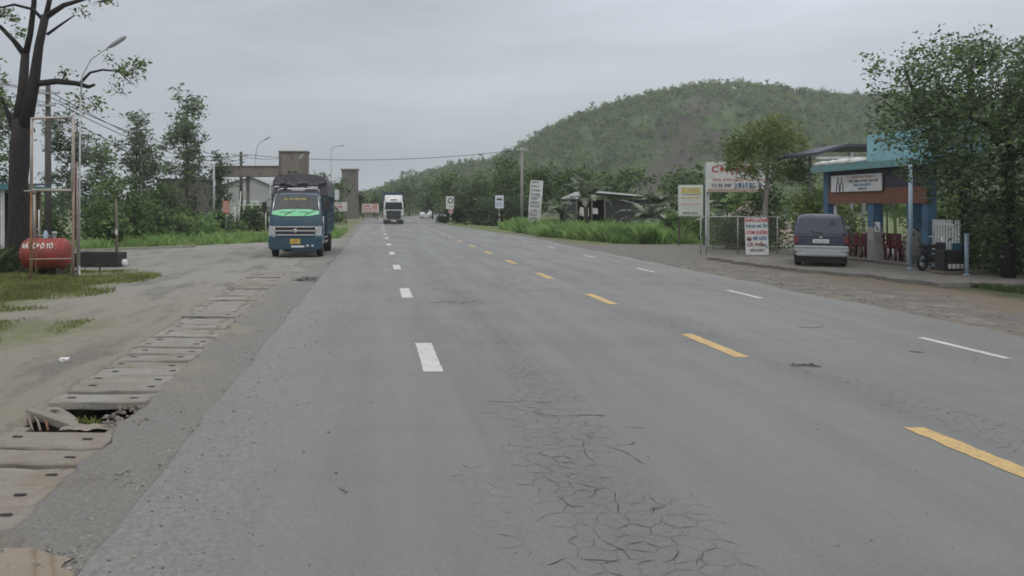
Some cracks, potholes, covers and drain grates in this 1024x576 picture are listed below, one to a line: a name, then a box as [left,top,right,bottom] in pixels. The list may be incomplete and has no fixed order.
crack [770,363,1024,454]
crack [437,311,763,576]
